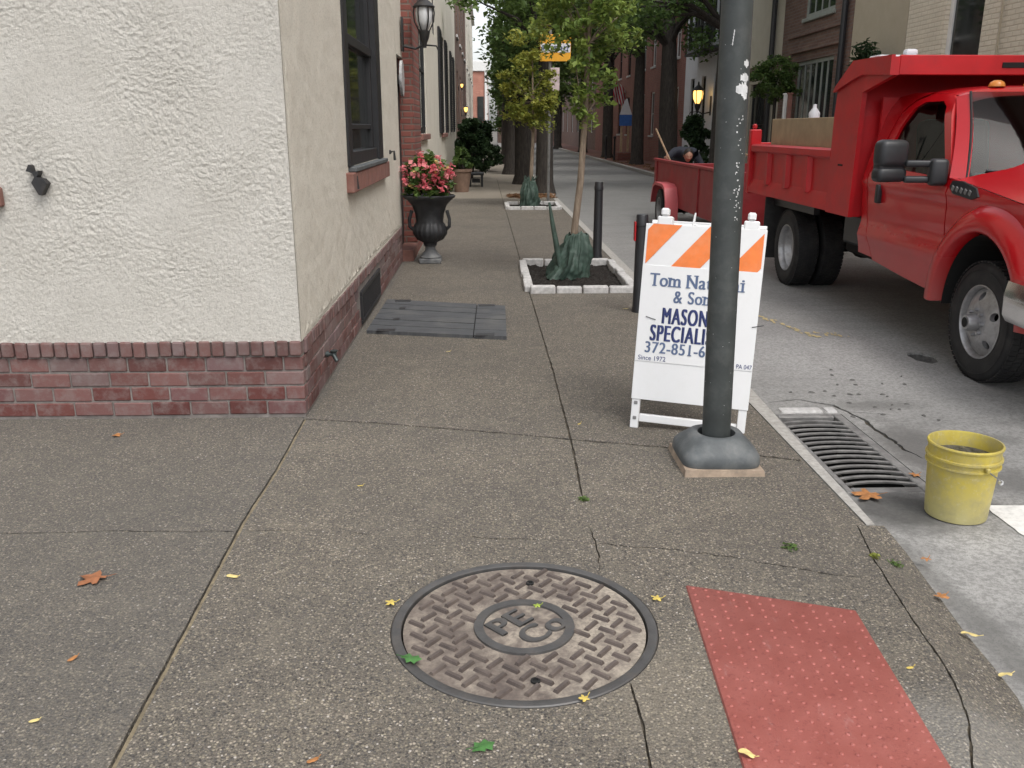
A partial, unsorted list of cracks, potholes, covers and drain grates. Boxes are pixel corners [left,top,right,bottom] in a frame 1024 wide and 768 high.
crack [497,181,652,768]
drain grate [776,414,926,493]
crack [859,530,973,768]
utility cover [366,299,507,340]
manhole cover [391,562,658,709]
